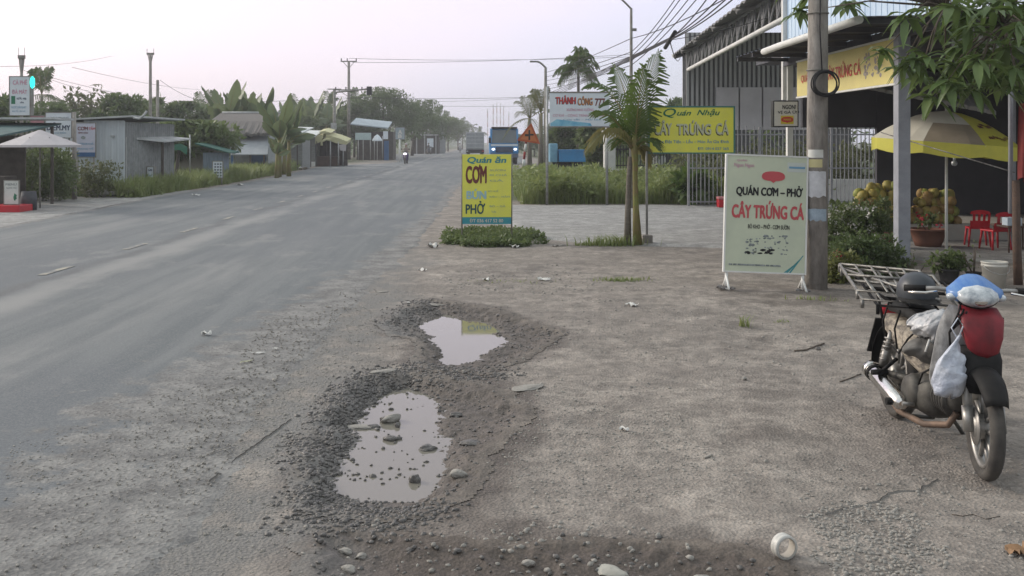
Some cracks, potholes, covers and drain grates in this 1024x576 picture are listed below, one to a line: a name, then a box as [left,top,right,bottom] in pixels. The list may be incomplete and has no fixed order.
pothole [375,298,568,375]
pothole [285,369,538,524]
crack [825,479,938,515]
